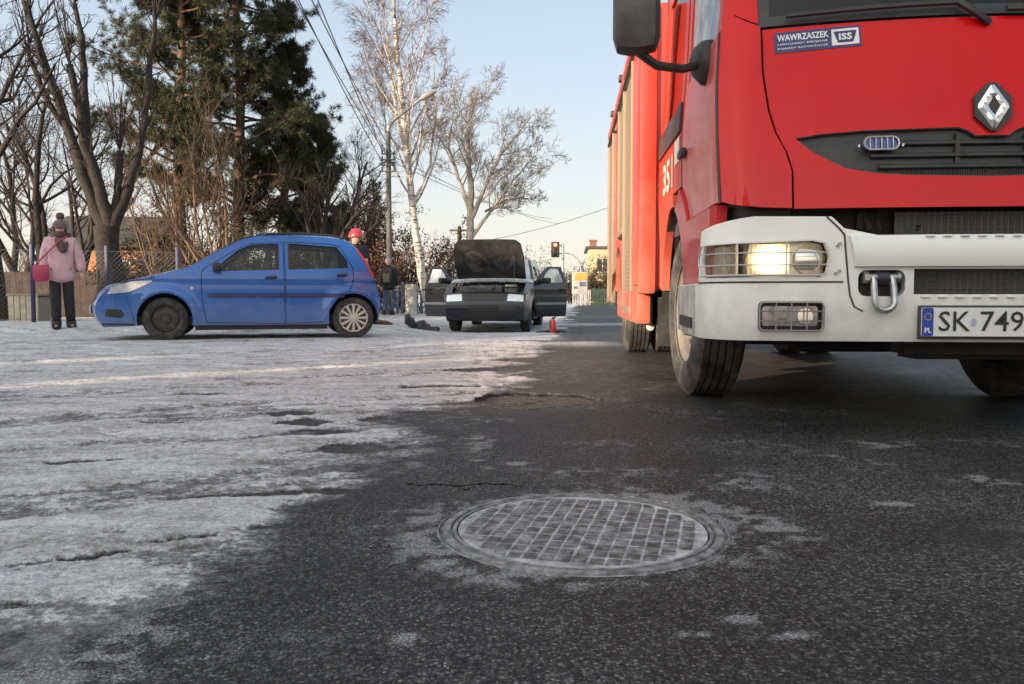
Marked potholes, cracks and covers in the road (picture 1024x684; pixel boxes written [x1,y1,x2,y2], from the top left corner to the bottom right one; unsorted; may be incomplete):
pothole [472,392,603,410]
manhole cover [436,493,731,577]
crack [407,482,522,497]
